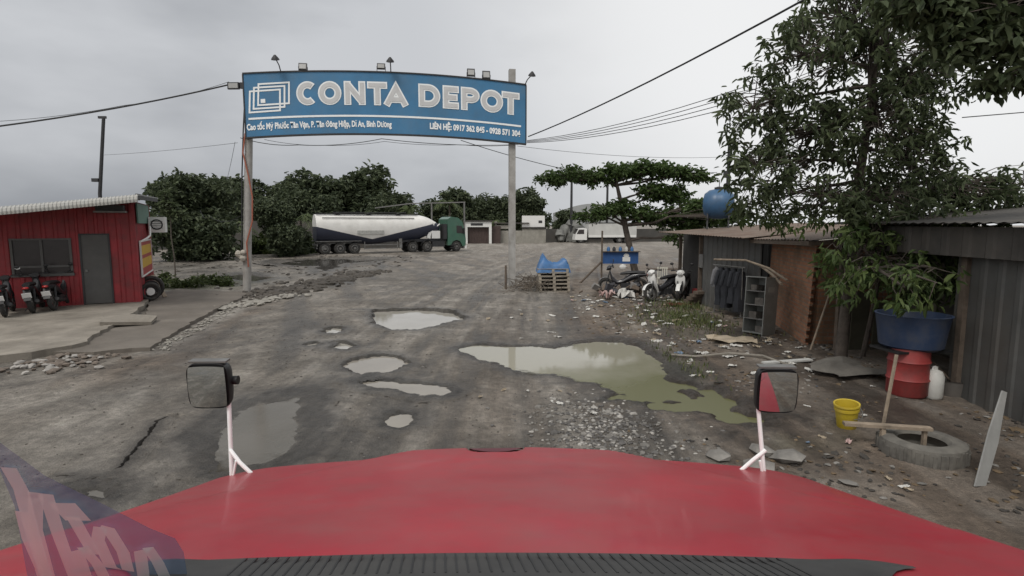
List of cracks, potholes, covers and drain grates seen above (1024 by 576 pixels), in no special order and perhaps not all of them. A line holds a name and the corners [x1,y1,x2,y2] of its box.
pothole [309,325,356,336]
pothole [330,372,477,404]
pothole [325,350,428,383]
crack [29,416,179,498]
pothole [360,307,477,333]
pothole [312,338,368,354]
